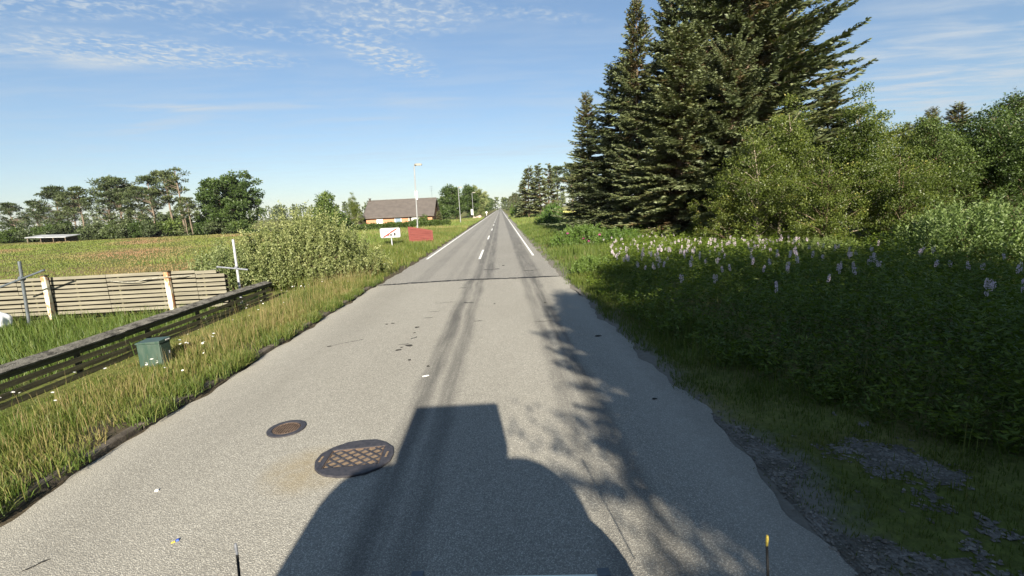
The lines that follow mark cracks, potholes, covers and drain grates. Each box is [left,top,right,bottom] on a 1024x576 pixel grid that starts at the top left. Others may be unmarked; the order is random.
manhole cover [266,420,306,438]
